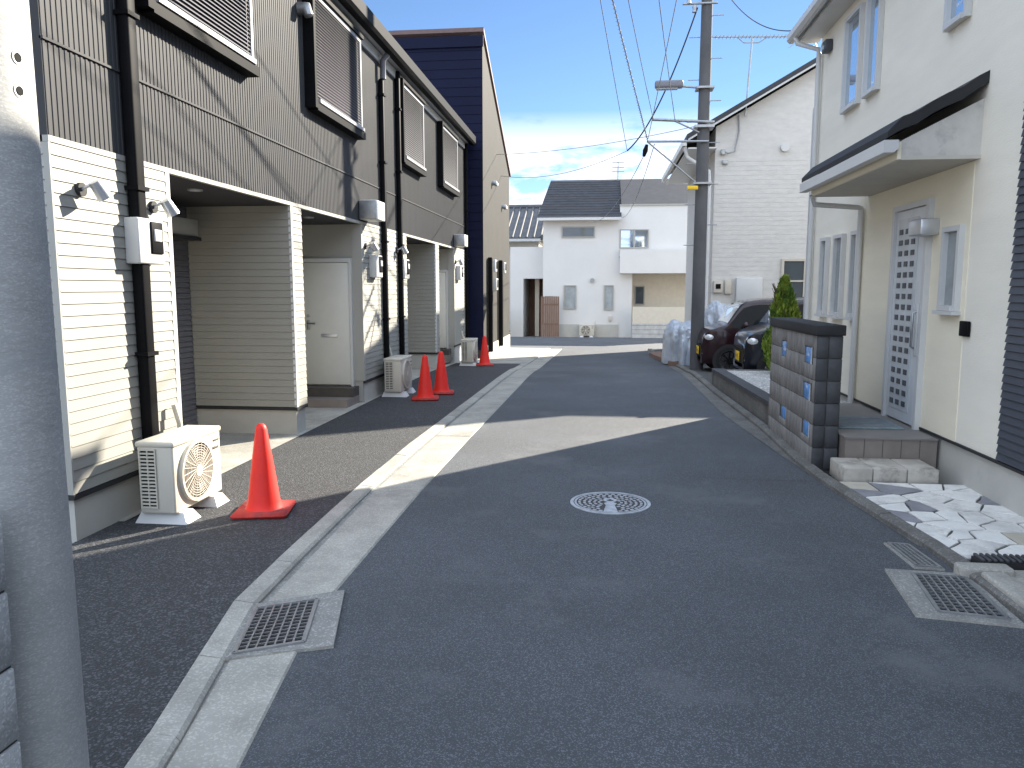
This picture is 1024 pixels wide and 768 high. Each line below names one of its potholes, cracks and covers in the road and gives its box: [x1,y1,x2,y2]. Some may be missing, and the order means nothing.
manhole cover [570,492,651,515]
drain grate [224,590,345,662]
drain grate [885,568,1024,629]
drain grate [884,542,945,571]
